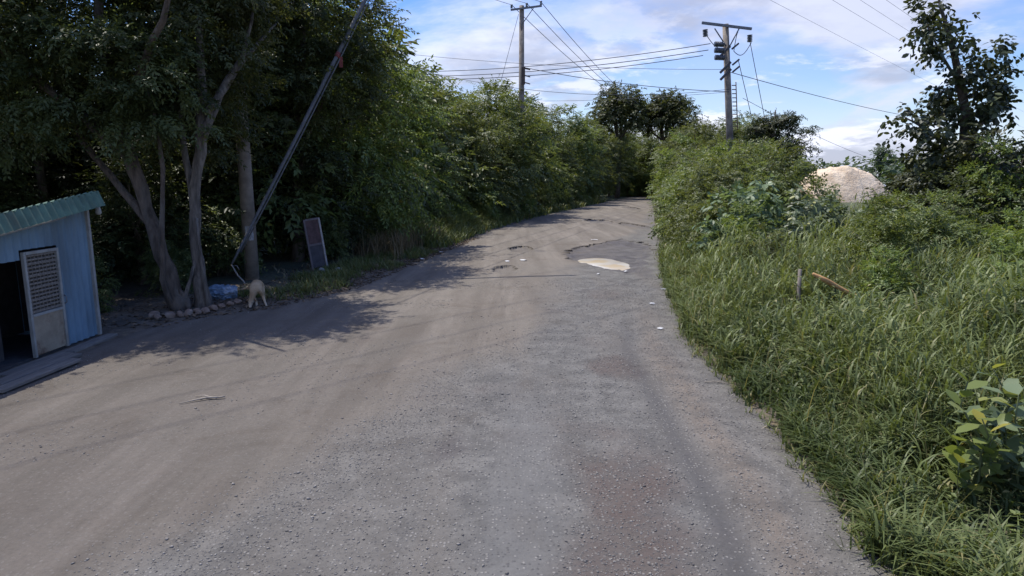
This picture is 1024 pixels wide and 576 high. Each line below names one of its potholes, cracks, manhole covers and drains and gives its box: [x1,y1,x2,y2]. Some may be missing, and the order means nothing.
pothole [503,245,539,253]
pothole [557,238,658,276]
pothole [484,264,526,274]
